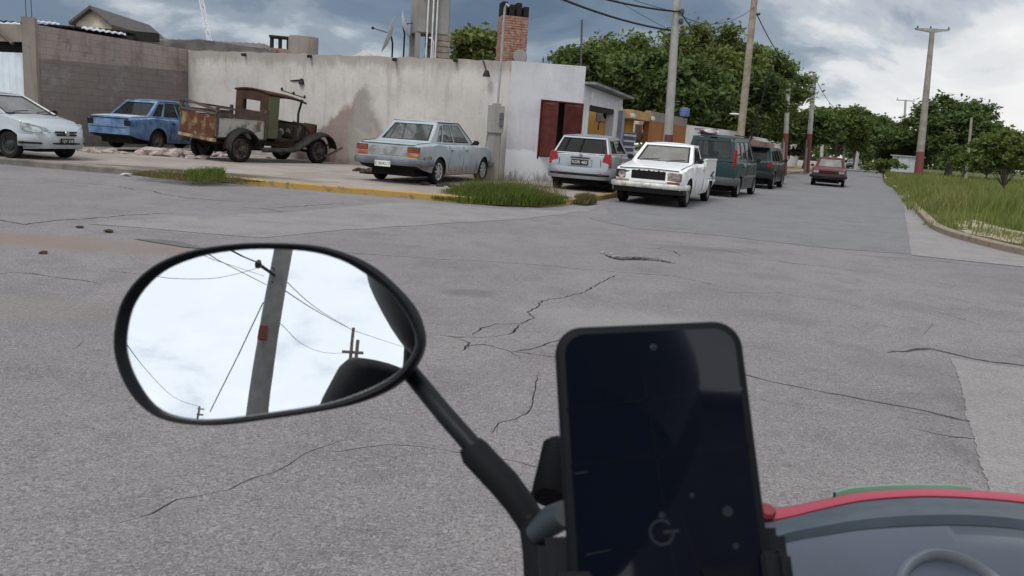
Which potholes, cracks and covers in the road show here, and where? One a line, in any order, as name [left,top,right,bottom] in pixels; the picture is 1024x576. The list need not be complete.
crack [887,316,1024,366]
crack [746,375,974,439]
crack [0,271,135,284]
pothole [600,250,679,264]
crack [0,179,222,225]
crack [355,253,720,436]
crack [111,439,537,525]
